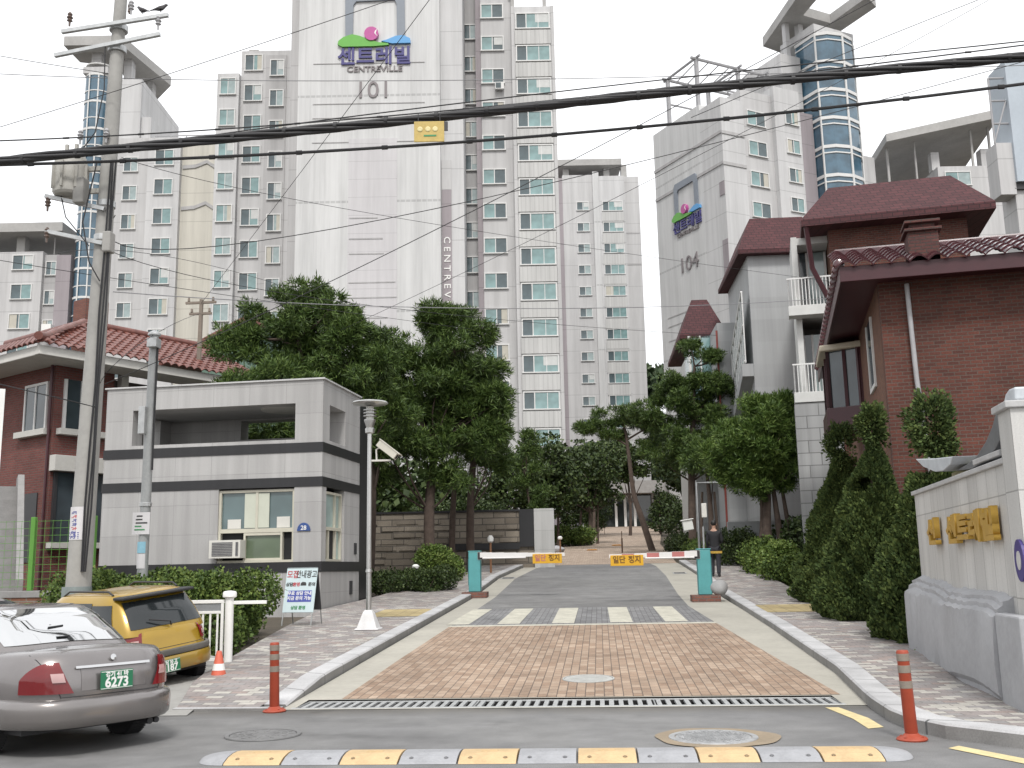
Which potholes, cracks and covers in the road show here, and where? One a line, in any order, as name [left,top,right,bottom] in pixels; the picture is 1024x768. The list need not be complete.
manhole cover [655,728,781,747]
manhole cover [562,674,615,683]
manhole cover [224,728,302,741]
